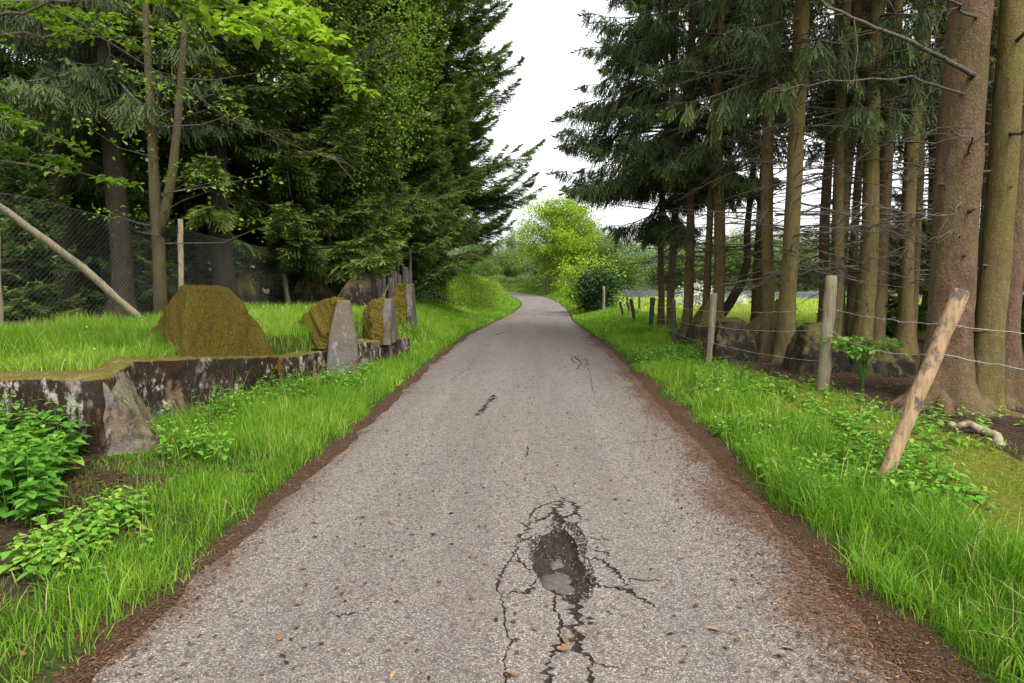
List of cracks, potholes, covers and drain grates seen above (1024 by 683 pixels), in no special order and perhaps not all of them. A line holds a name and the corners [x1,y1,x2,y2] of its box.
crack [474,395,496,416]
pothole [527,513,597,605]
crack [567,354,594,392]
crack [327,601,363,618]
